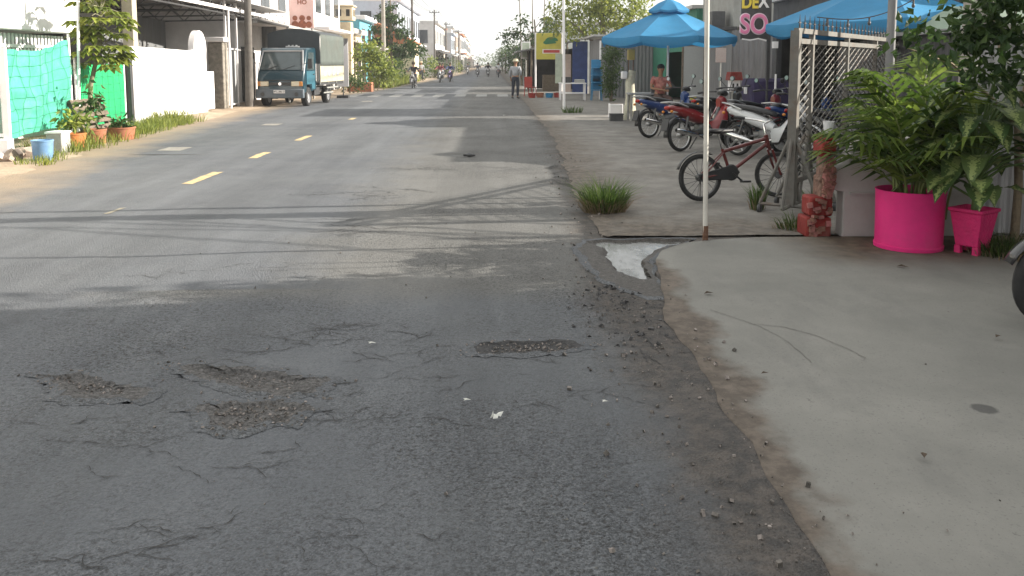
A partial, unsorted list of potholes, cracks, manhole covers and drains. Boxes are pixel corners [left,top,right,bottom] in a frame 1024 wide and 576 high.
pothole [157,360,358,401]
crack [16,507,247,576]
crack [120,320,484,429]
pothole [459,337,604,359]
crack [5,412,300,481]
pothole [17,368,168,406]
pothole [165,395,332,439]
